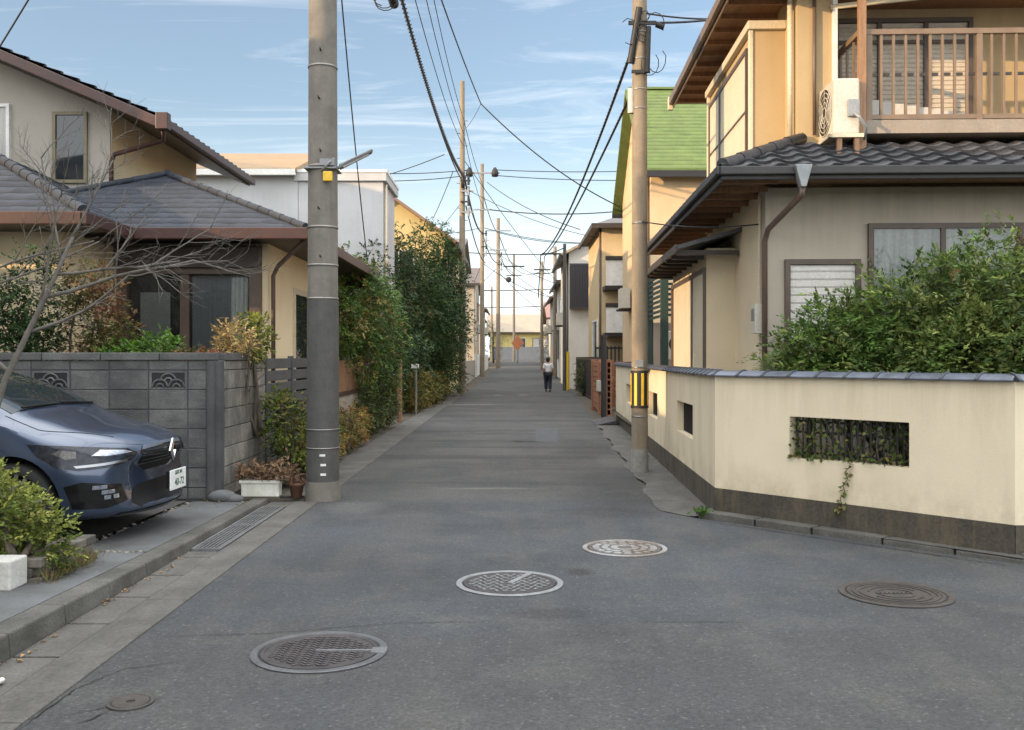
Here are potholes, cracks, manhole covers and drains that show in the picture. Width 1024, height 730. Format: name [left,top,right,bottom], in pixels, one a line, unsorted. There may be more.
manhole cover [456,570,564,597]
manhole cover [838,580,956,608]
crack [19,660,184,729]
manhole cover [582,539,667,557]
drain grate [191,506,286,552]
manhole cover [249,631,388,674]
utility cover [106,694,155,711]
